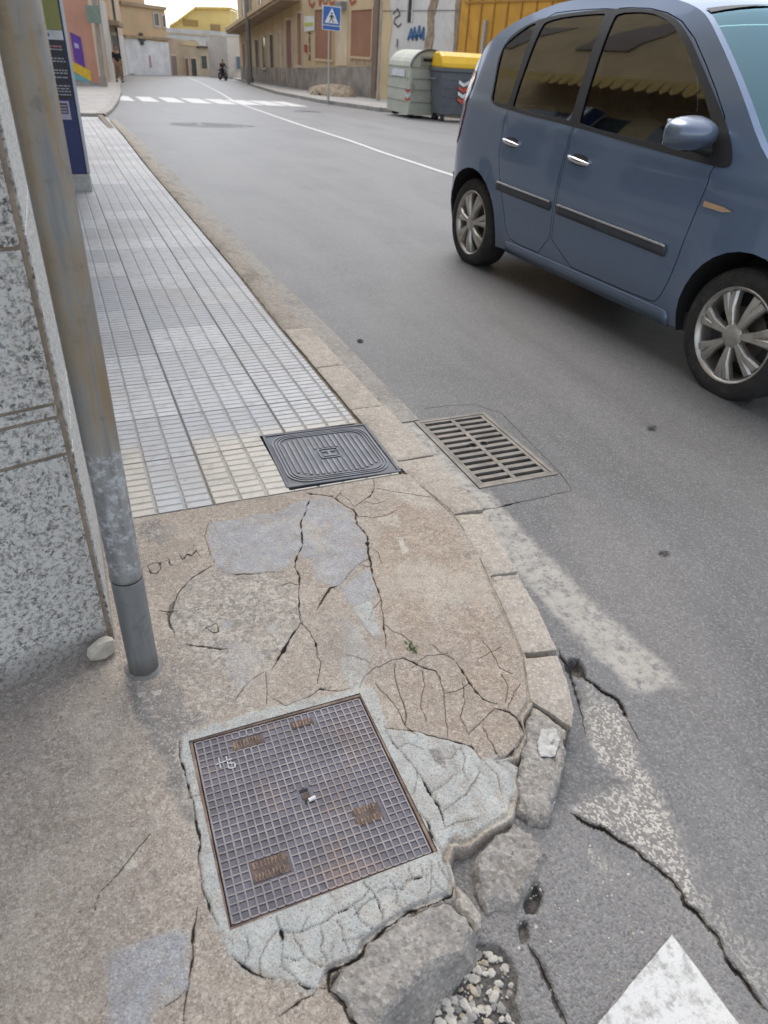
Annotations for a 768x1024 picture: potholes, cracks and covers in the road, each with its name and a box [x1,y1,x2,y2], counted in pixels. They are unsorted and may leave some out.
pothole [523,886,542,915]
crack [528,813,768,1024]
crack [165,908,198,1024]
manhole cover [189,694,437,930]
pothole [518,921,529,943]
crack [559,650,640,741]
crack [205,480,524,859]
drain grate [414,412,558,489]
manhole cover [262,423,402,493]
